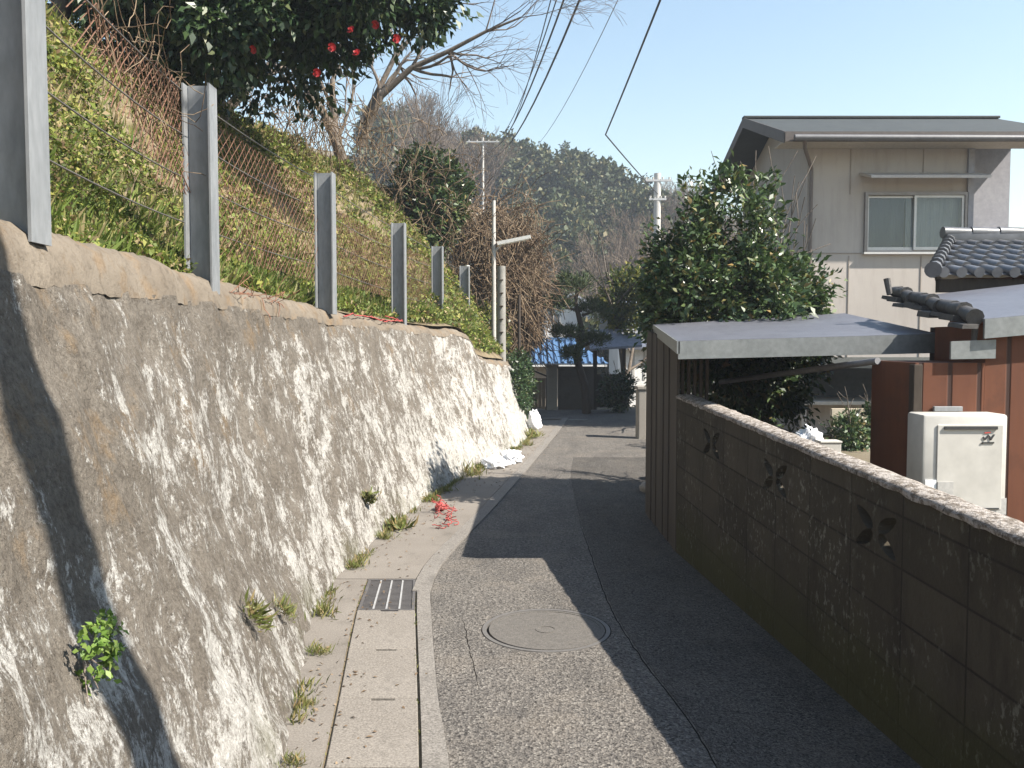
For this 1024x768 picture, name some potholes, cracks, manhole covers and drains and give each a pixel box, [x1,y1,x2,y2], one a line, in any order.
drain grate [358,579,416,611]
manhole cover [482,609,610,653]
crack [462,620,479,687]
